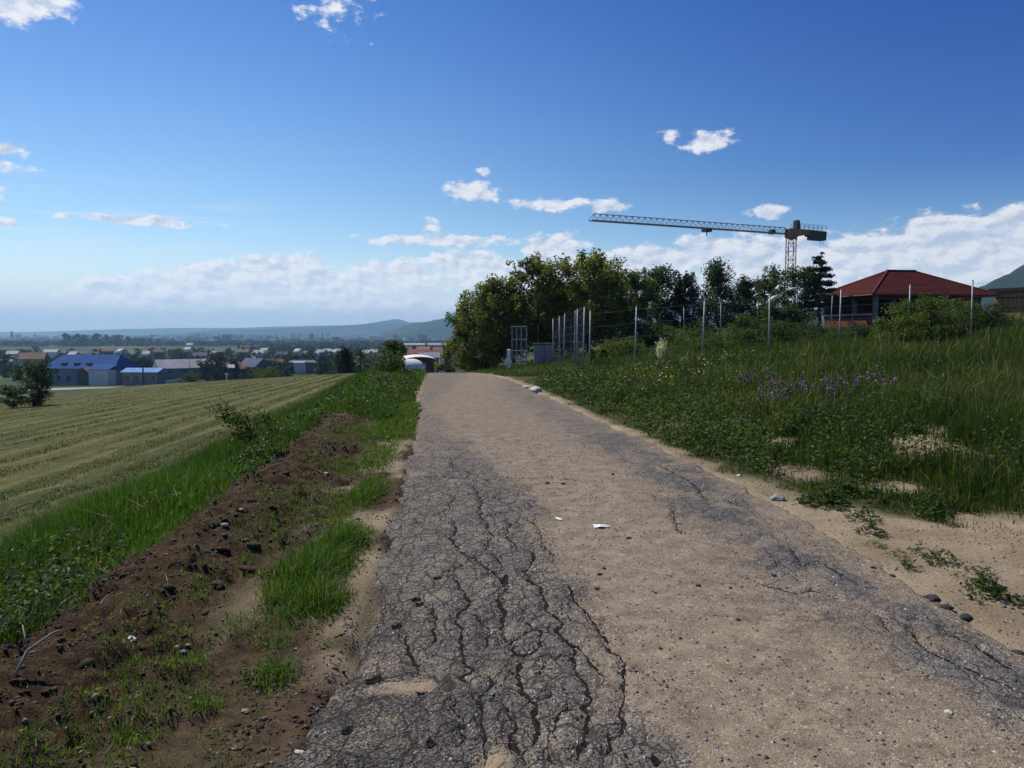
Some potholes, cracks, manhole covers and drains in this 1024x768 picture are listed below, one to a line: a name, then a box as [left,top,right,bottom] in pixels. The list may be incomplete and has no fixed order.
crack [403,457,657,766]
crack [755,550,857,596]
crack [910,617,1022,693]
